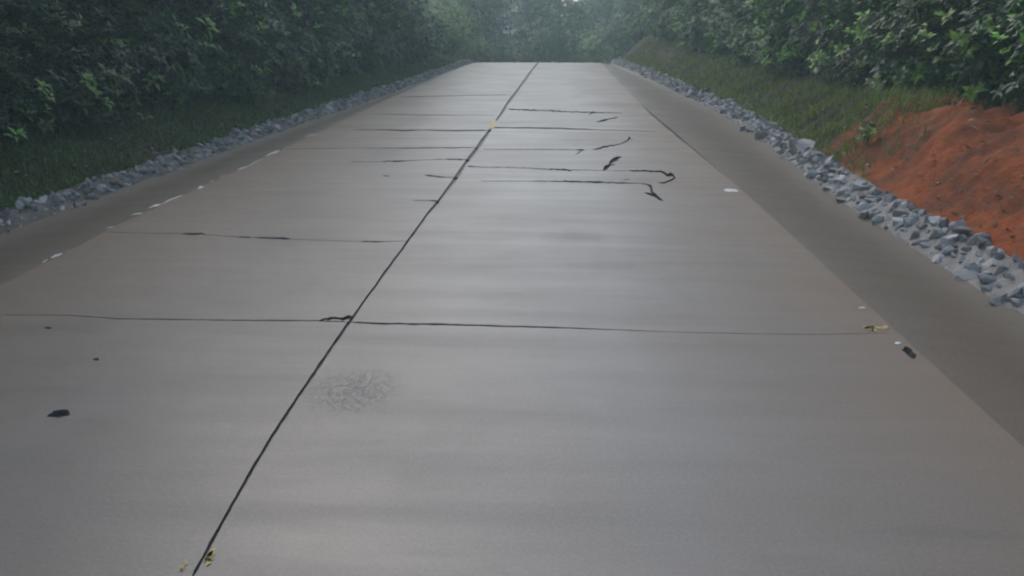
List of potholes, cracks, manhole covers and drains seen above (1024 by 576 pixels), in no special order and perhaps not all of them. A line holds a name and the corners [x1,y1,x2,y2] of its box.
crack [351,109,675,201]
pothole [47,409,70,418]
